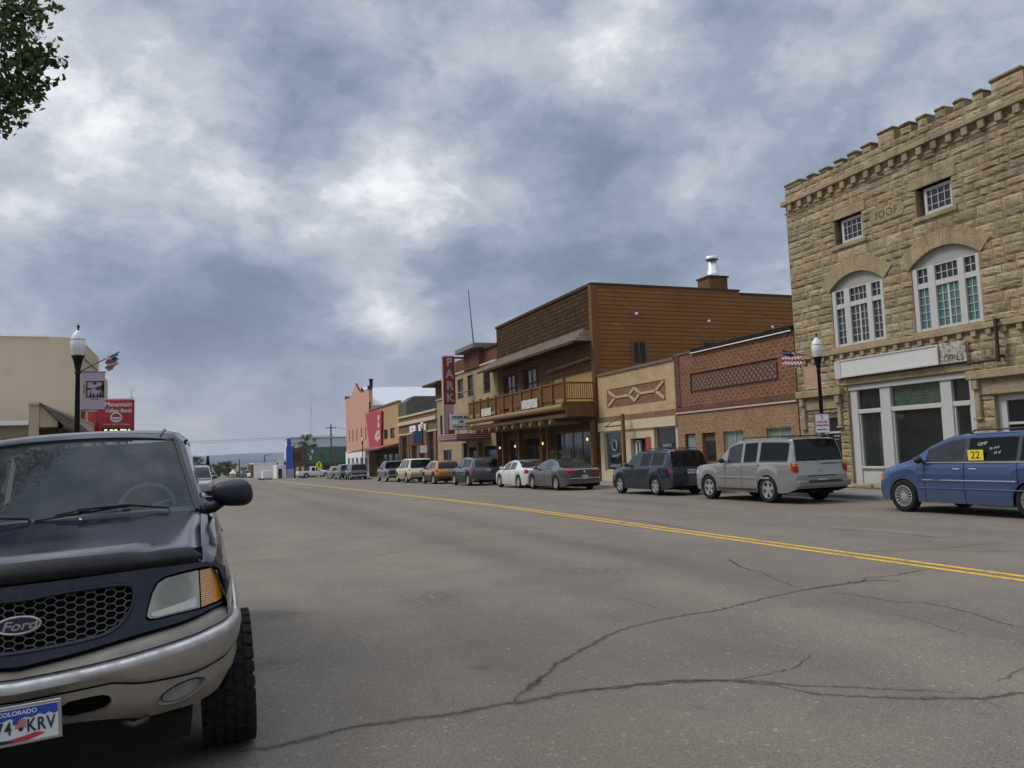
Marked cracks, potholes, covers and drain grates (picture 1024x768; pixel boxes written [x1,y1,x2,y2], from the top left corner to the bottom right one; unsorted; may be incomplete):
crack [239,564,1024,752]
